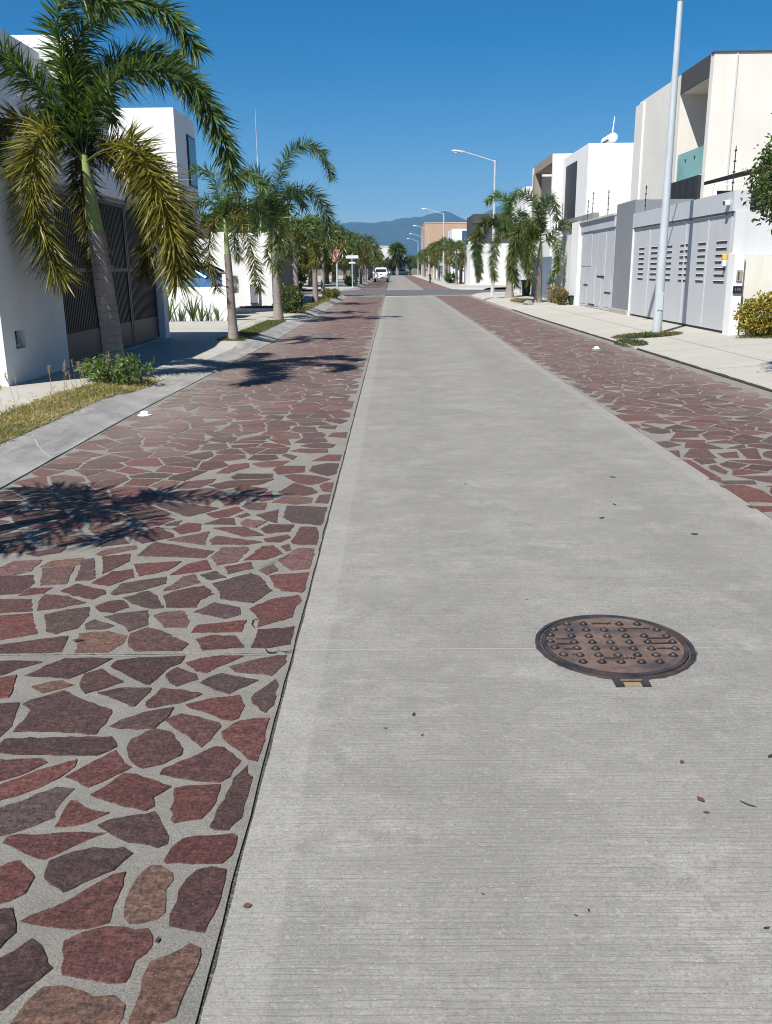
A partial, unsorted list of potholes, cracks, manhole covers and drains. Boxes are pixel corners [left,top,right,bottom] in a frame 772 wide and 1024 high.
manhole cover [535,614,698,687]
